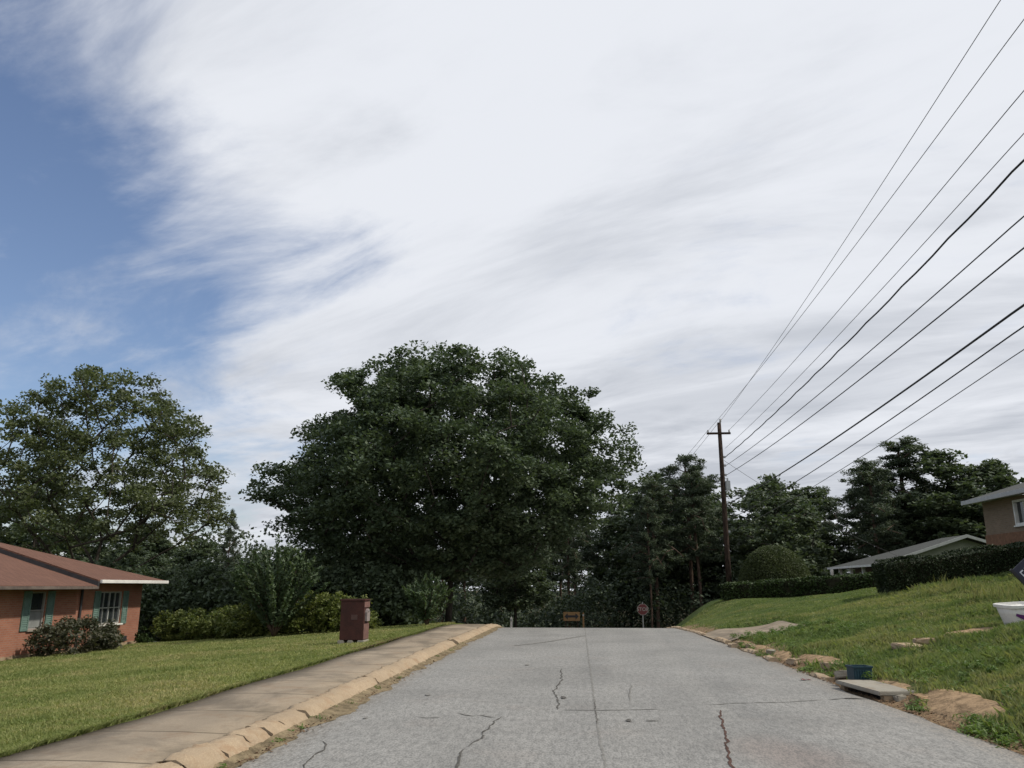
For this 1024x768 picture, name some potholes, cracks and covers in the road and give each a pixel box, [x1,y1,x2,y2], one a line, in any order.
crack [455,713,503,768]
crack [552,668,563,710]
crack [579,684,643,724]
crack [707,700,811,768]
